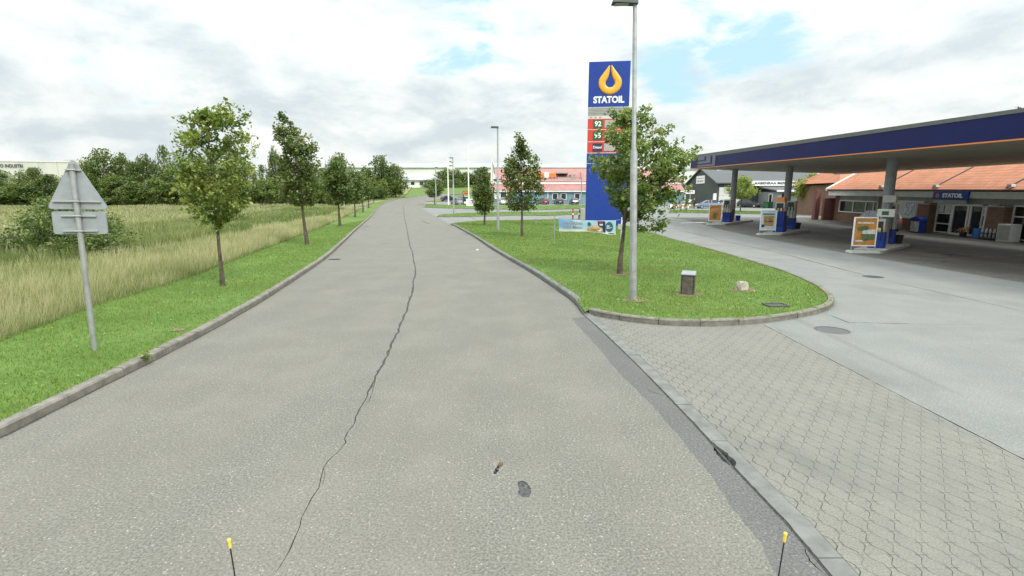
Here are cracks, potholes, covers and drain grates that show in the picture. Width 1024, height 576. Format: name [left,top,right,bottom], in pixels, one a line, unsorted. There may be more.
crack [274,200,429,575]
pothole [518,481,531,497]
manhole cover [814,326,851,334]
